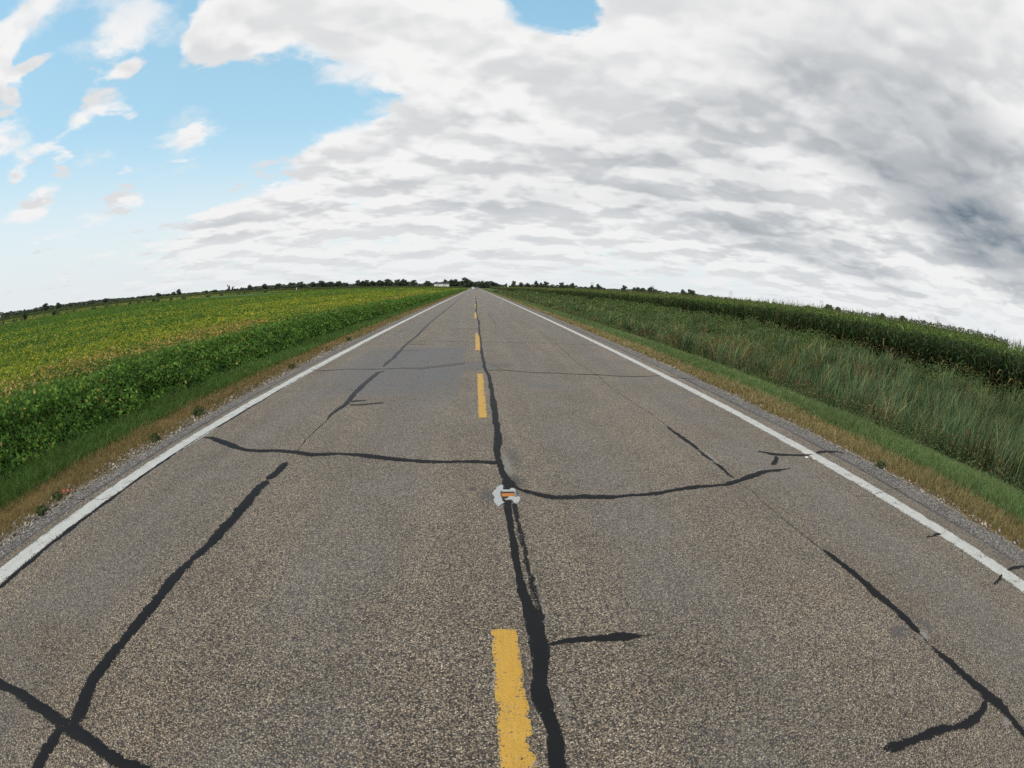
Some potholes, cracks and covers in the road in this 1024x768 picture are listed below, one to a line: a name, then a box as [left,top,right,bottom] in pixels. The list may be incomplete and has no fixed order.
crack [312,362,695,380]
